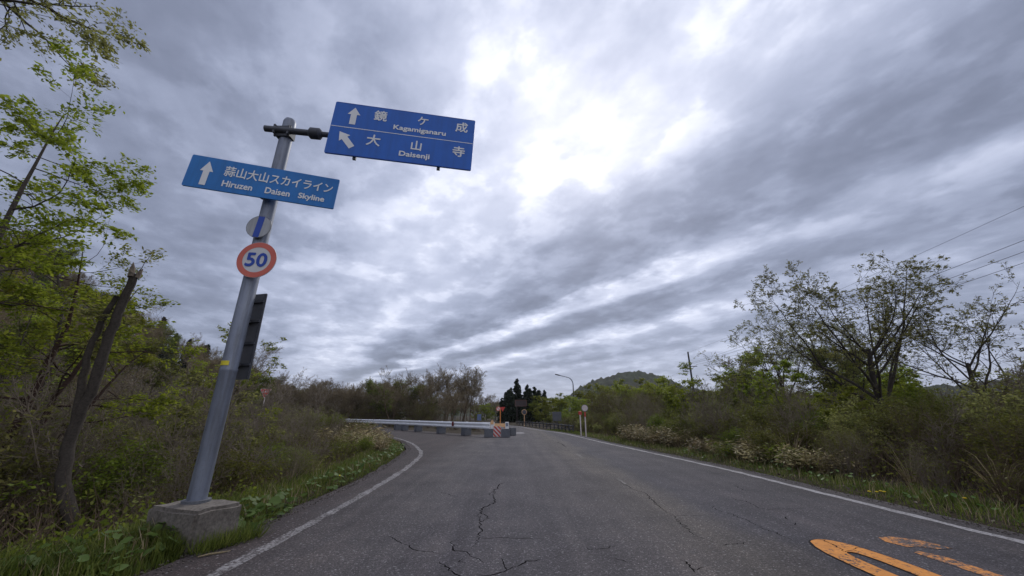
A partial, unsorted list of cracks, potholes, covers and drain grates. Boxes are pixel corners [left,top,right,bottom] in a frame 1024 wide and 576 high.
crack [389,483,541,576]
crack [623,484,800,545]
